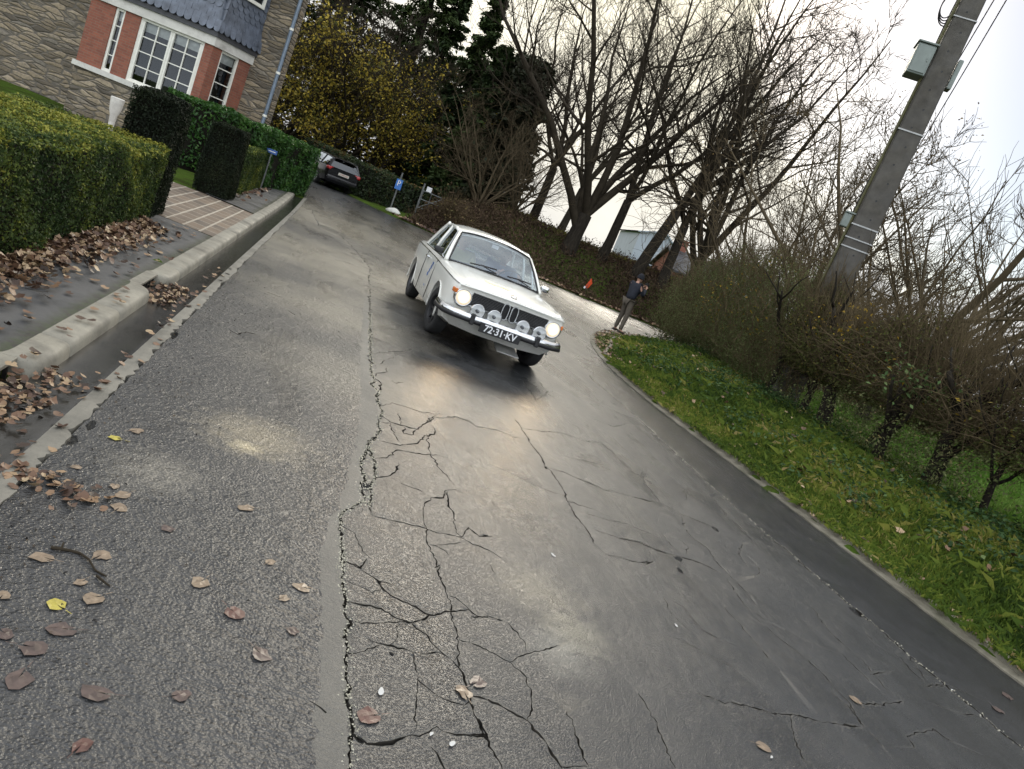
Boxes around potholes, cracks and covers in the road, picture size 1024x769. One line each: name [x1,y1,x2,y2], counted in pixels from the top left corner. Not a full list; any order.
crack [515,419,781,672]
crack [638,693,676,768]
crack [310,211,589,769]
crack [698,609,902,763]
crack [907,728,953,747]
